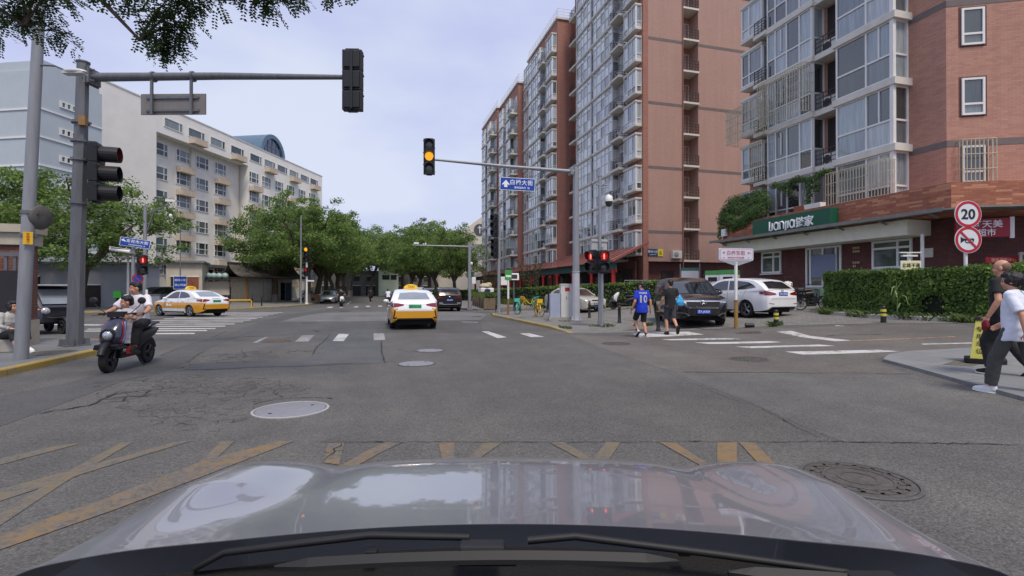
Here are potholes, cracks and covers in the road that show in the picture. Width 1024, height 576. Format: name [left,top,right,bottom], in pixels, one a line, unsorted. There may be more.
manhole cover [799,461,926,502]
manhole cover [250,401,329,419]
crack [39,330,333,431]
